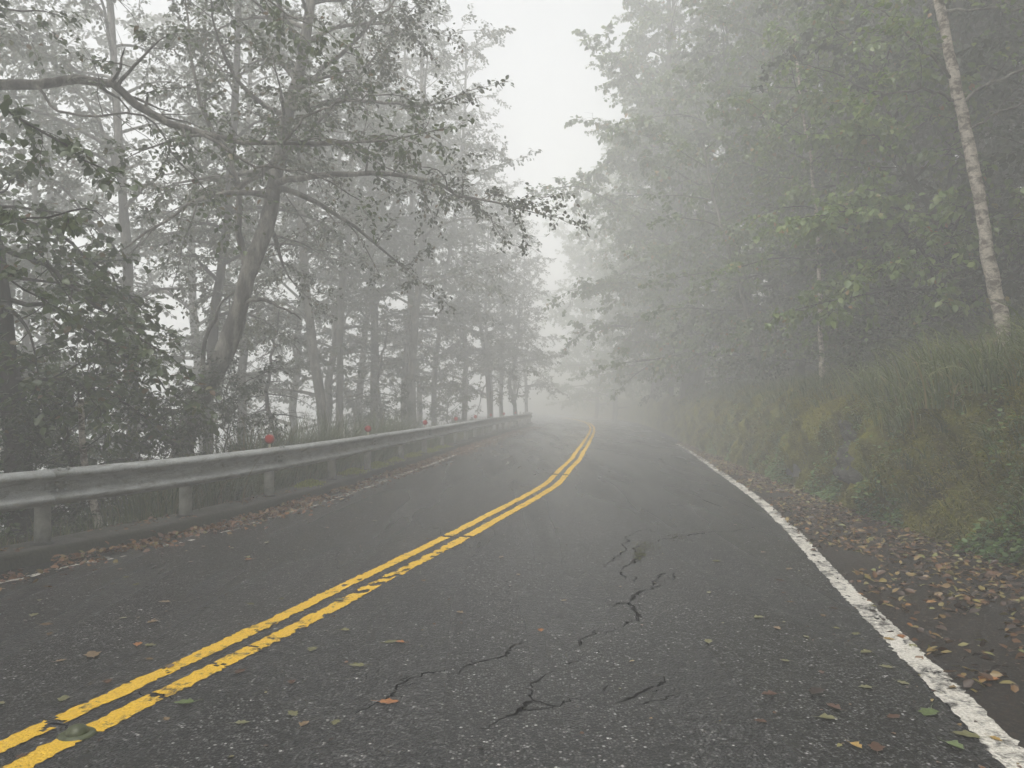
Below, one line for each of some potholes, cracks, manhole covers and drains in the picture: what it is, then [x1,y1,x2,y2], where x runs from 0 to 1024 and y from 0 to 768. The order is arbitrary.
crack [355,527,753,729]
